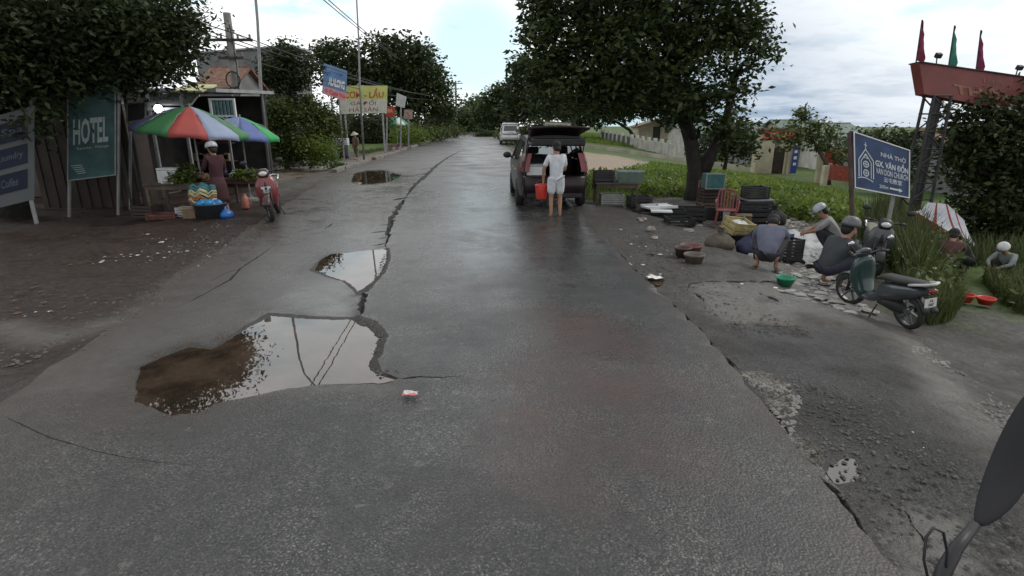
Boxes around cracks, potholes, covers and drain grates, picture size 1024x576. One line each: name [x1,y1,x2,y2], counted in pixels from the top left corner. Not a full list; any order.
pothole [825,457,860,484]
crack [357,292,368,315]
crack [893,508,928,549]
crack [167,249,269,310]
crack [2,415,206,466]
crack [819,476,868,535]
pothole [309,247,391,295]
crack [674,280,780,370]
crack [372,150,499,248]
pothole [350,170,403,185]
